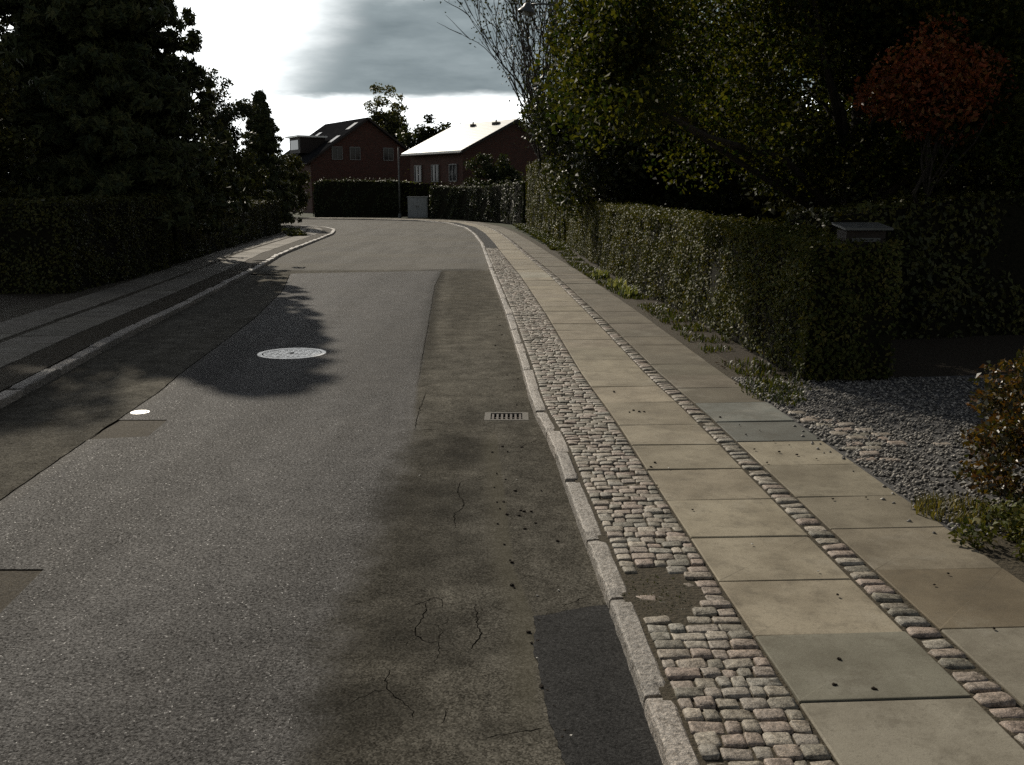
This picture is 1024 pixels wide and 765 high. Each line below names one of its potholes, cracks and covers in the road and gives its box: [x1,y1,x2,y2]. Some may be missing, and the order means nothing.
crack [453,482,465,529]
crack [468,604,482,652]
crack [352,671,414,720]
manhole cover [257,348,326,359]
drain grate [484,412,529,420]
crack [406,598,448,663]
